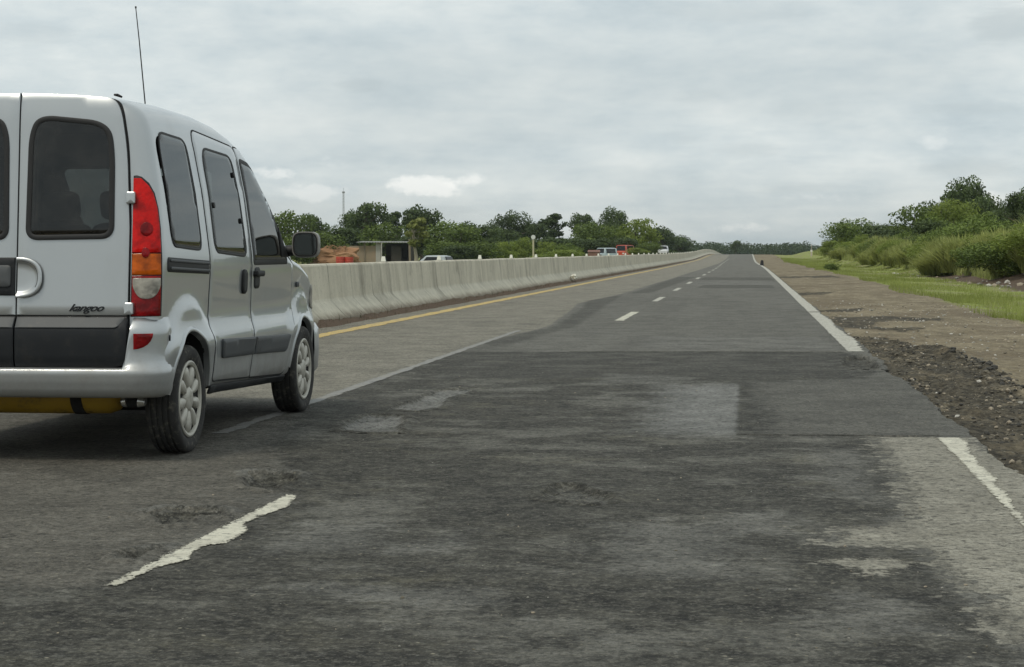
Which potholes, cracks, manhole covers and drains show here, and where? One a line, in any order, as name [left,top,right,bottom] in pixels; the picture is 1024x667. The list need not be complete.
pothole [525,482,631,506]
pothole [227,468,316,493]
pothole [97,542,188,564]
pothole [122,504,249,528]
pothole [328,413,419,434]
pothole [376,387,486,412]
